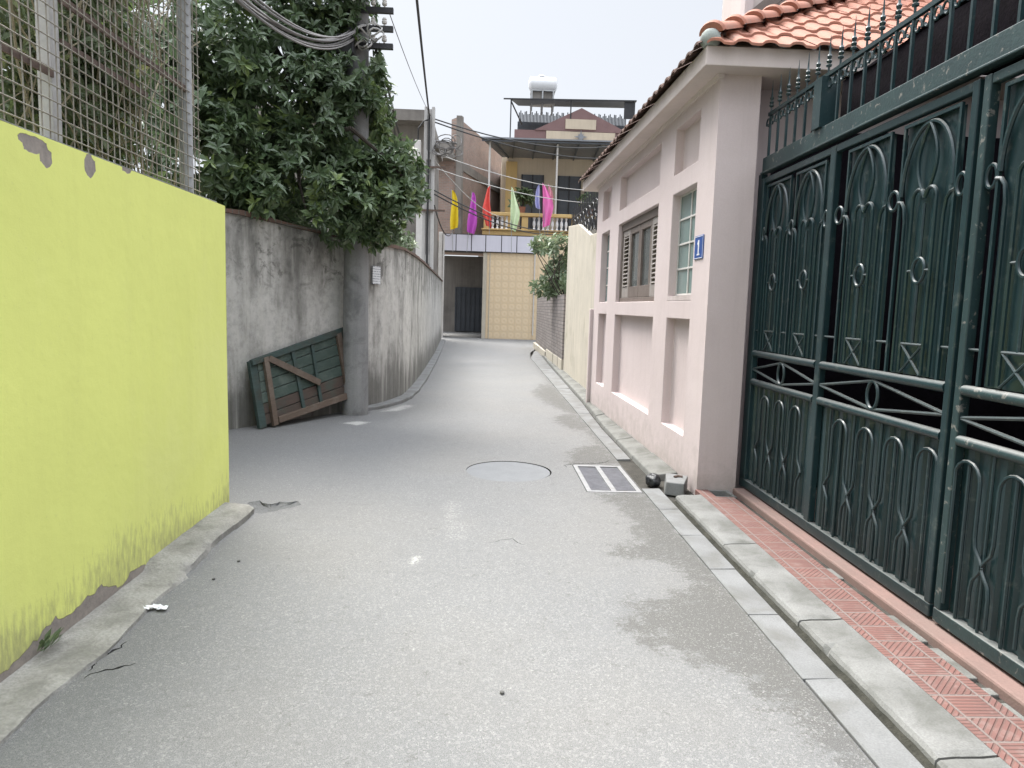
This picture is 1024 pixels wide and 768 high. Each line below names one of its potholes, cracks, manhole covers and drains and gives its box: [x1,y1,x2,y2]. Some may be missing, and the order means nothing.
pothole [247,500,301,514]
manhole cover [466,461,552,482]
drain grate [572,465,643,493]
crack [86,642,135,677]
